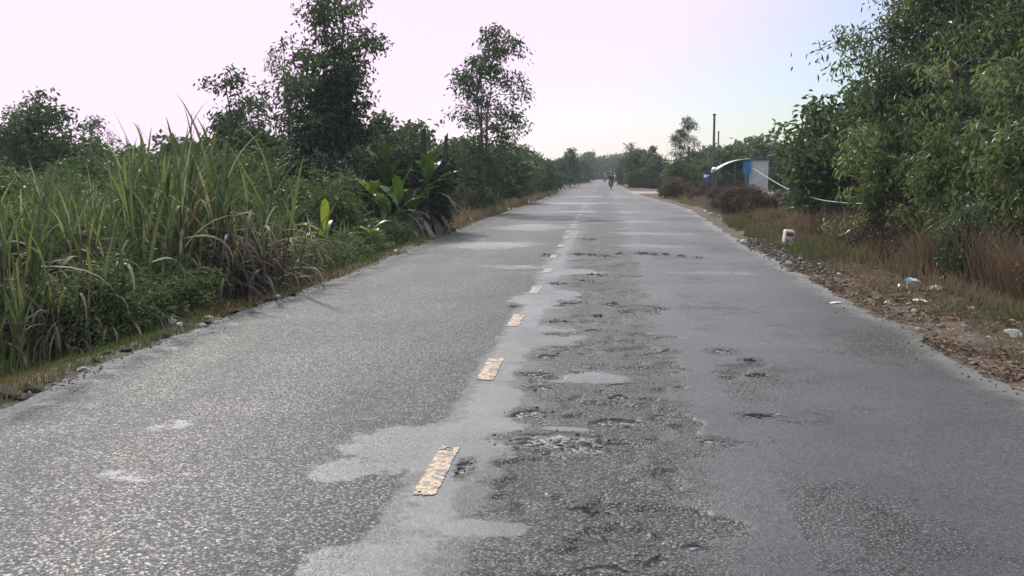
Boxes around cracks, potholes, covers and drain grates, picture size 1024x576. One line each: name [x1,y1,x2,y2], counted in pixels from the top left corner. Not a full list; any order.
pothole [580,416,643,430]
pothole [489,429,651,455]
pothole [455,461,473,474]
pothole [504,406,555,419]
